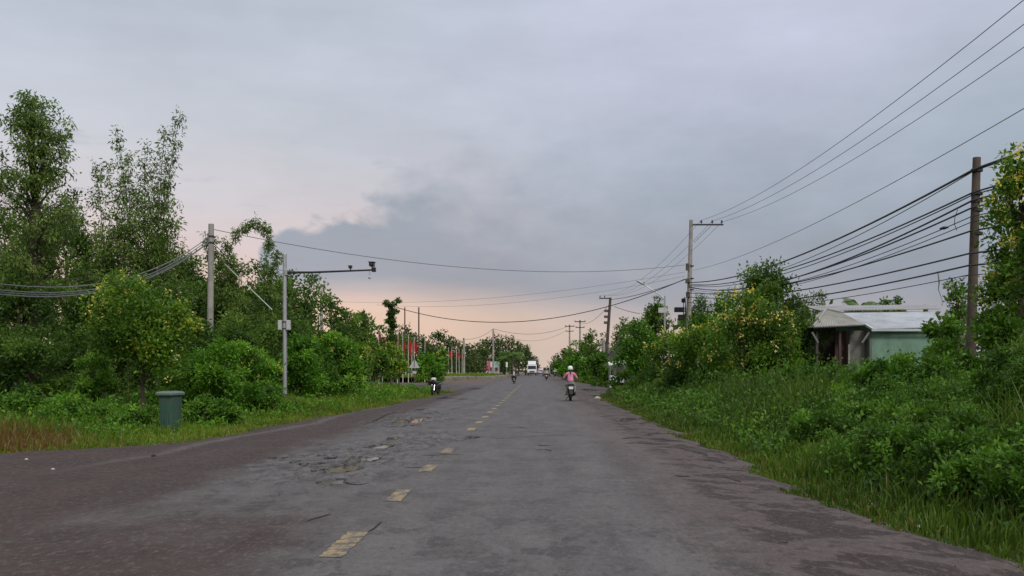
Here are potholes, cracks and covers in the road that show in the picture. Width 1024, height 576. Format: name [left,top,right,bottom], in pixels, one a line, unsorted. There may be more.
pothole [322,463,364,473]
